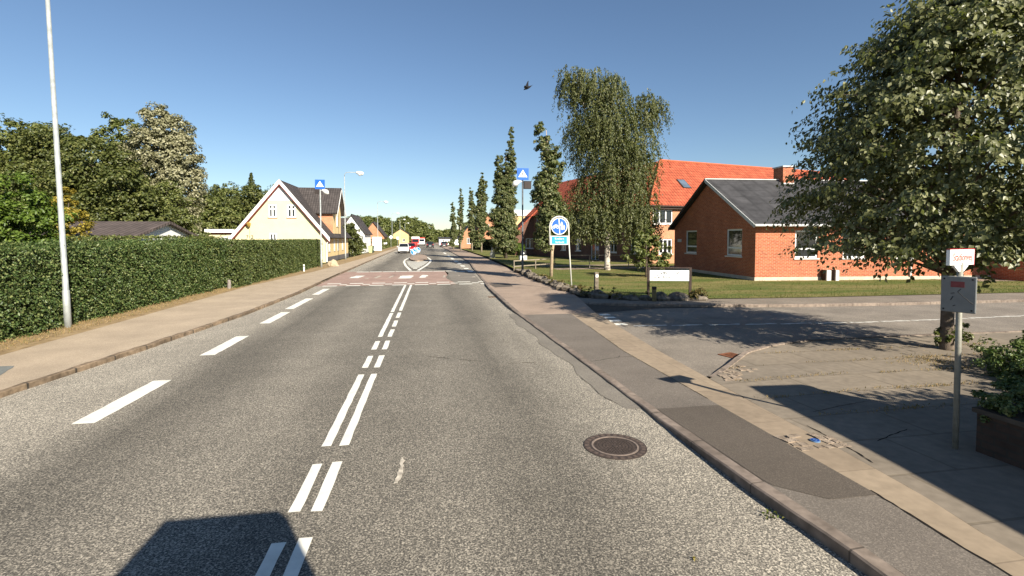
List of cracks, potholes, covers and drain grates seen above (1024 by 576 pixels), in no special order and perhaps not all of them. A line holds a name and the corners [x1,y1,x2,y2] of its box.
manhole cover [584,434,647,460]
